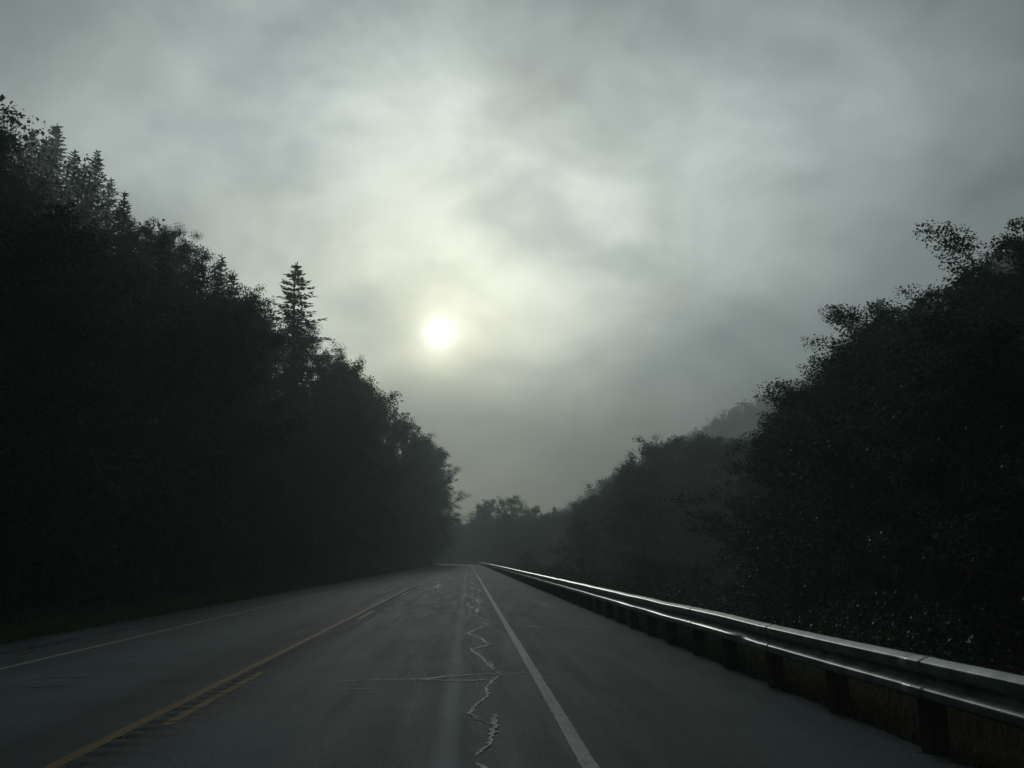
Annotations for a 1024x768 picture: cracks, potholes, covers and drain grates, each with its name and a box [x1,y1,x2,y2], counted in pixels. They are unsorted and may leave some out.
crack [267,582,573,768]
